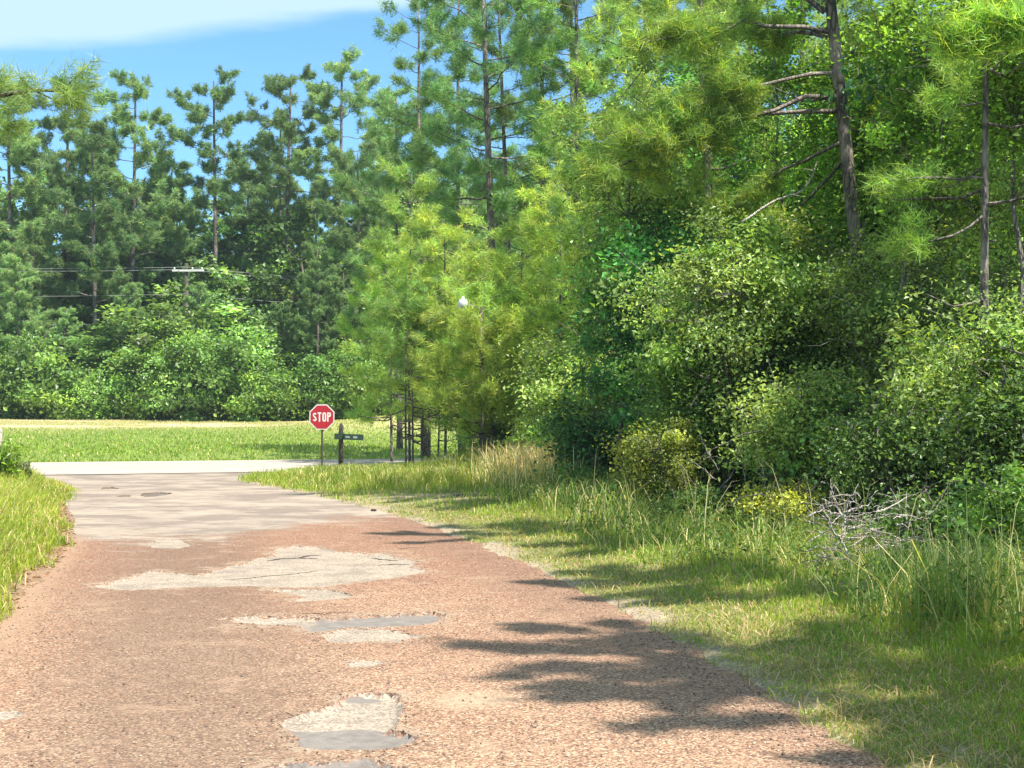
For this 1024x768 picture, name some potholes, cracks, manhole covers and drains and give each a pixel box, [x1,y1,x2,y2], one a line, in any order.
pothole [0,711,24,720]
pothole [92,545,427,590]
pothole [261,759,395,768]
pothole [322,629,423,643]
pothole [279,692,420,750]
crack [373,548,410,566]
pothole [222,611,446,632]
